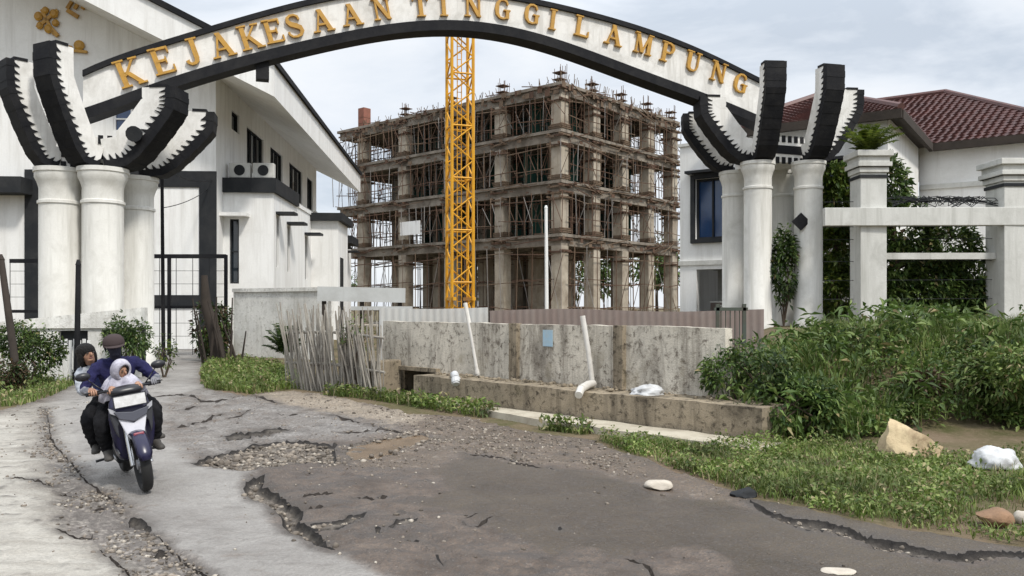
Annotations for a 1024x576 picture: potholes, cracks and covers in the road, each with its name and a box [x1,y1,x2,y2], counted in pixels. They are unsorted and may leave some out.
crack [156,394,314,428]
pothole [243,474,335,550]
crack [13,477,74,497]
pothole [191,440,337,471]
crack [57,529,130,576]
crack [303,491,333,509]
pothole [344,433,430,461]
pothole [128,517,152,533]
